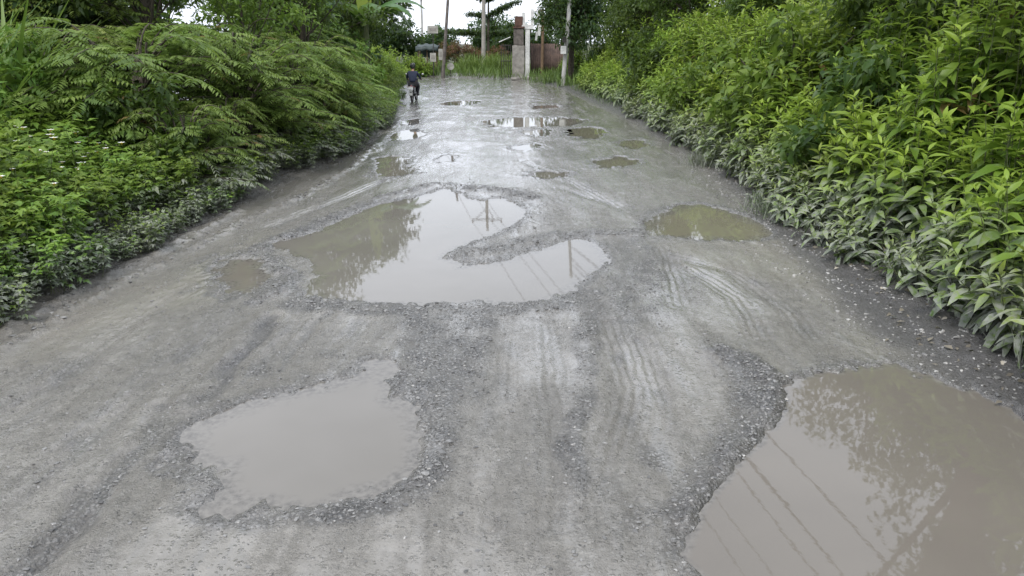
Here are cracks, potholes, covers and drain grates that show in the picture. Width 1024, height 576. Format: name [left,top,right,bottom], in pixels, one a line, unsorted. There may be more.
pothole [607,136,659,151]
pothole [144,351,462,535]
pothole [251,186,625,310]
pothole [201,247,298,305]
pothole [382,127,431,141]
pothole [586,155,650,169]
pothole [633,200,791,242]
pothole [519,167,578,180]
pothole [659,355,1024,576]
pothole [477,116,590,128]
pothole [359,153,425,180]
pothole [559,125,612,140]
